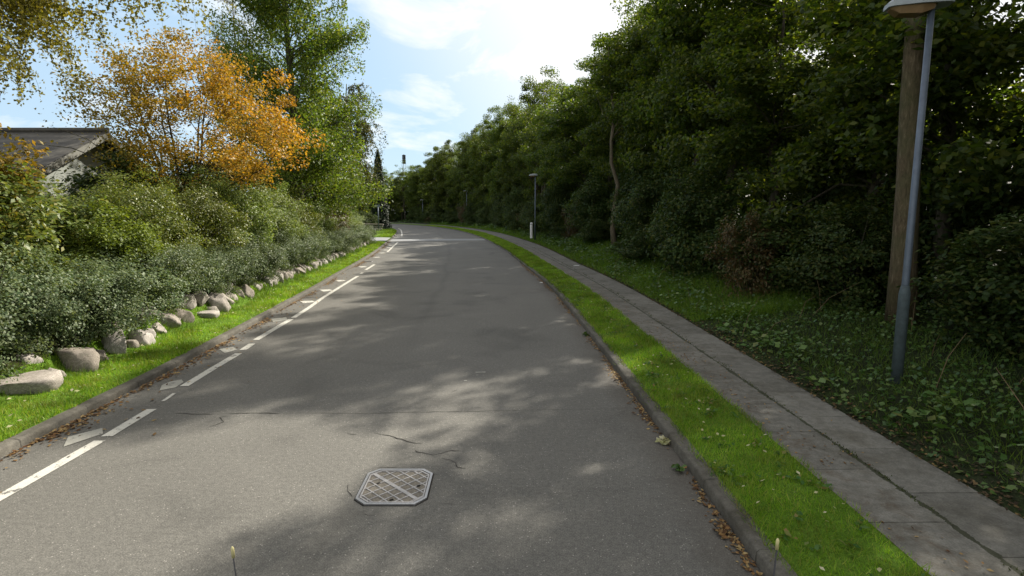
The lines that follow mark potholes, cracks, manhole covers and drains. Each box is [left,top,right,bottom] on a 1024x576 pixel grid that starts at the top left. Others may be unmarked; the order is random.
crack [377,433,461,468]
